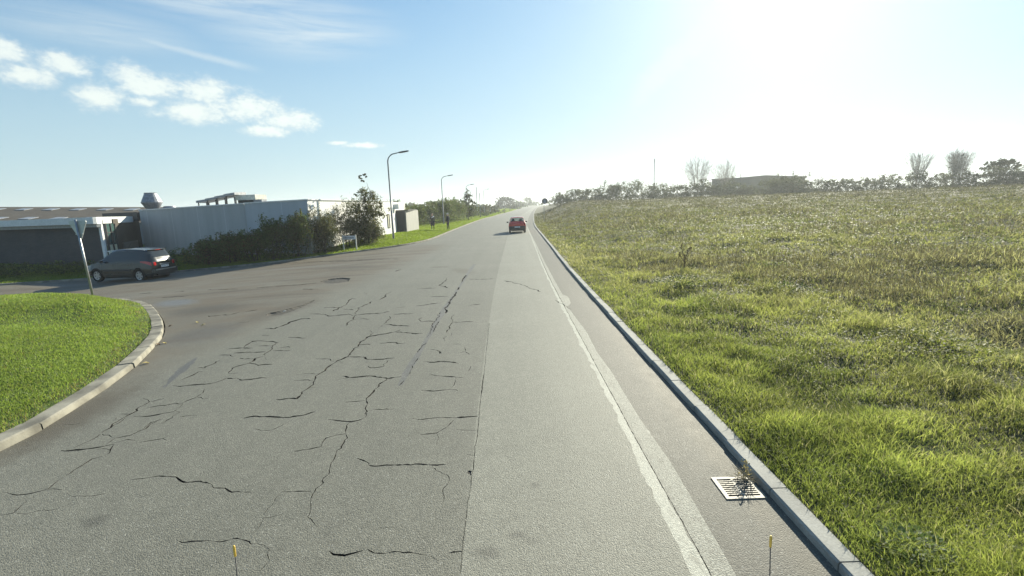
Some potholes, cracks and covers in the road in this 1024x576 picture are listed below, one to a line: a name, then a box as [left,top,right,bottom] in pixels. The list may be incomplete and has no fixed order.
crack [329,549,462,560]
crack [177,538,294,561]
crack [4,275,478,534]
drain grate [711,476,767,500]
